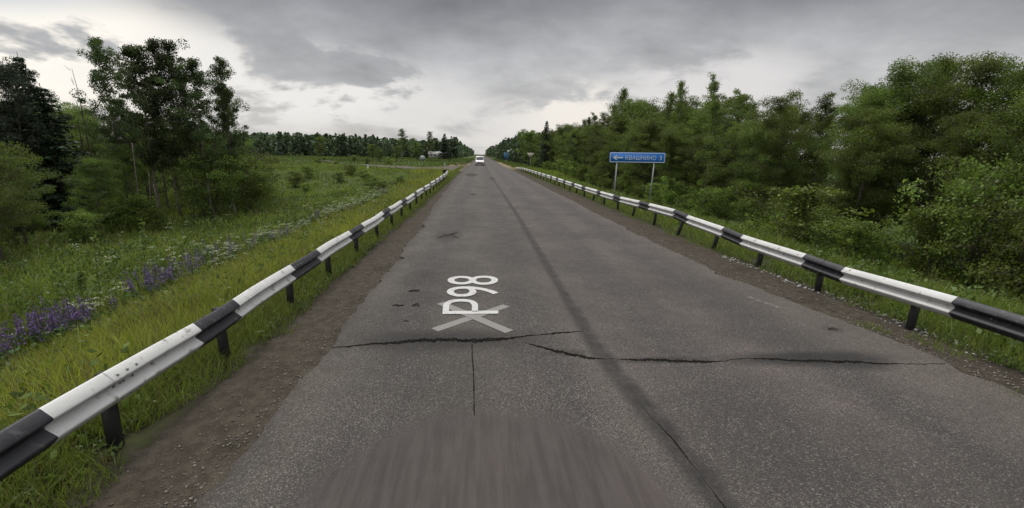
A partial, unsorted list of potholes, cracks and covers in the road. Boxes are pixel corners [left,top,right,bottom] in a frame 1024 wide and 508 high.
crack [332,331,945,416]
crack [641,405,726,508]
